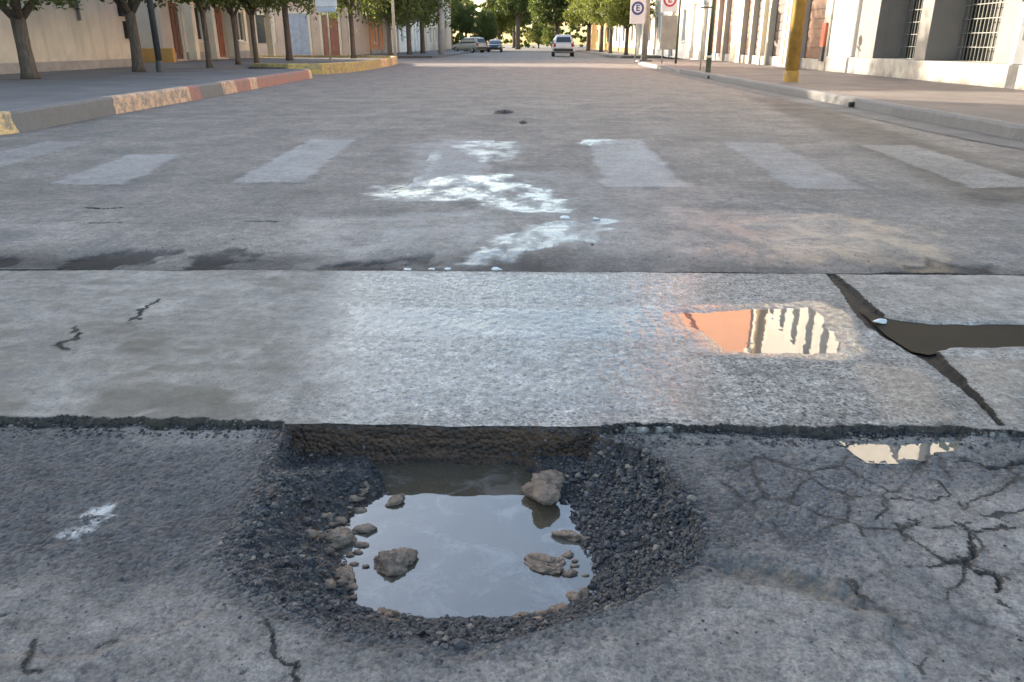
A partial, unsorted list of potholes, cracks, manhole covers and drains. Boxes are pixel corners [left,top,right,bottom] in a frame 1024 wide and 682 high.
pothole [217,423,709,647]
crack [0,268,1024,675]
